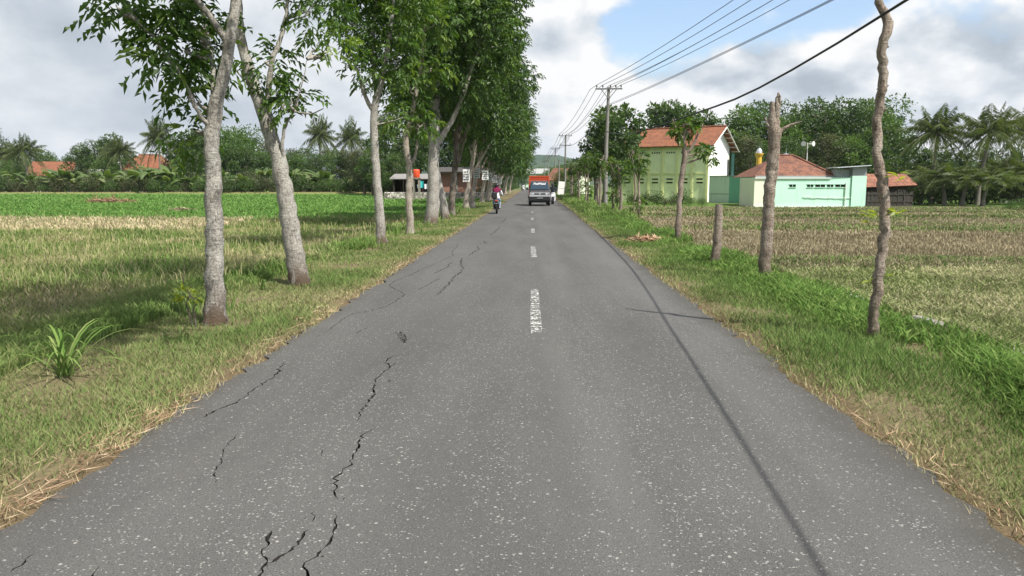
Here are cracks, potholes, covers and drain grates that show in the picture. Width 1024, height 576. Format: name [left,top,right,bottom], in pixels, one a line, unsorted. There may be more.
crack [195,363,286,419]
crack [316,217,507,338]
crack [258,354,399,576]
crack [212,437,236,483]
